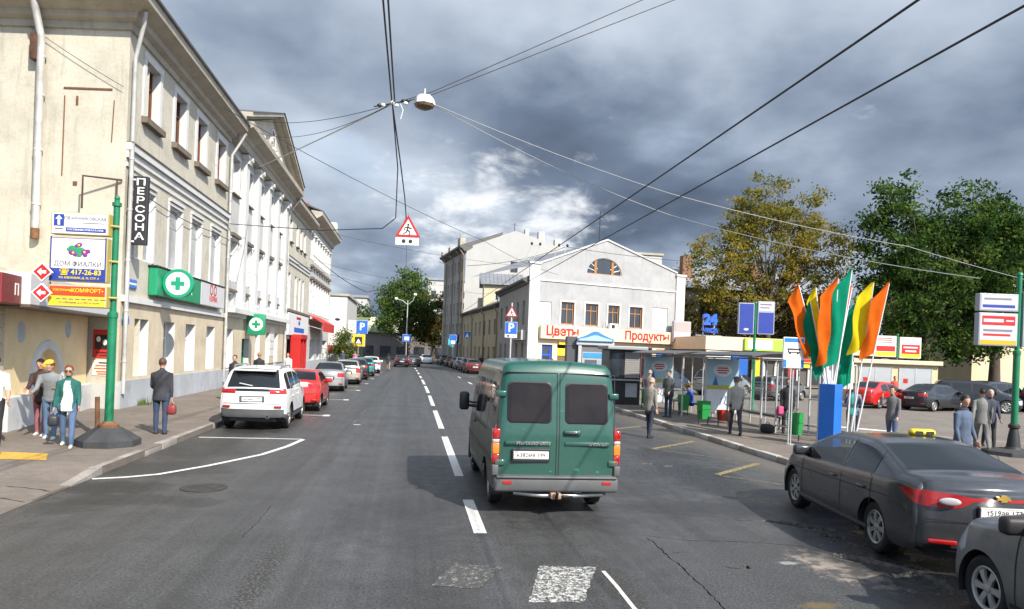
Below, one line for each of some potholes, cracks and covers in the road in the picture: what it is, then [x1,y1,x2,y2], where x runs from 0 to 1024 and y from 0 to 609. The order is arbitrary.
crack [642,535,819,609]
manhole cover [179,483,228,492]
